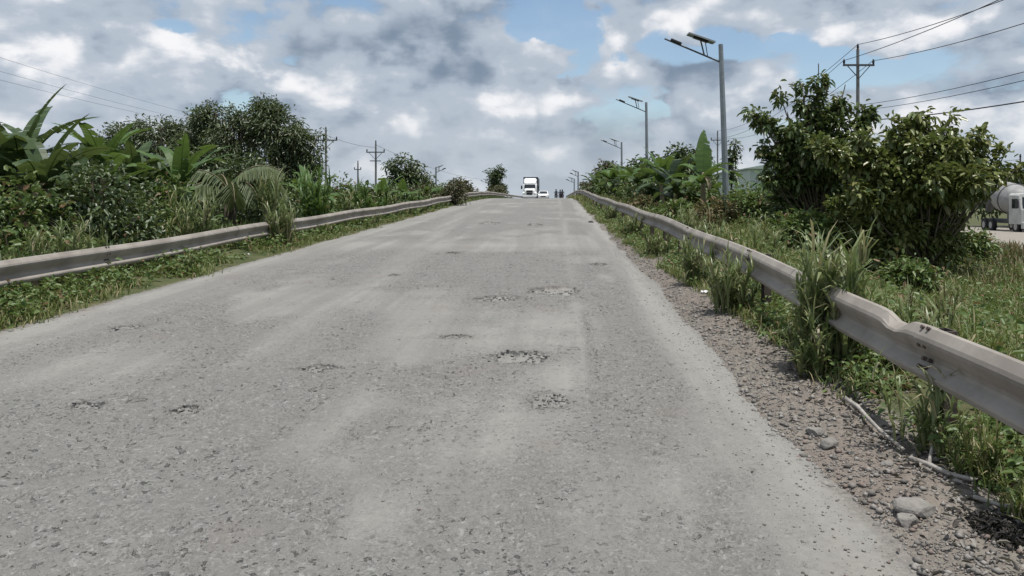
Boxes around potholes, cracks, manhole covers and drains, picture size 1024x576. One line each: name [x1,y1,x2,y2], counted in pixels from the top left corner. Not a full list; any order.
pothole [482,349,557,365]
pothole [291,362,343,375]
pothole [464,294,527,303]
pothole [526,389,574,409]
pothole [520,285,585,297]
pothole [65,400,109,410]
pothole [168,403,202,415]
